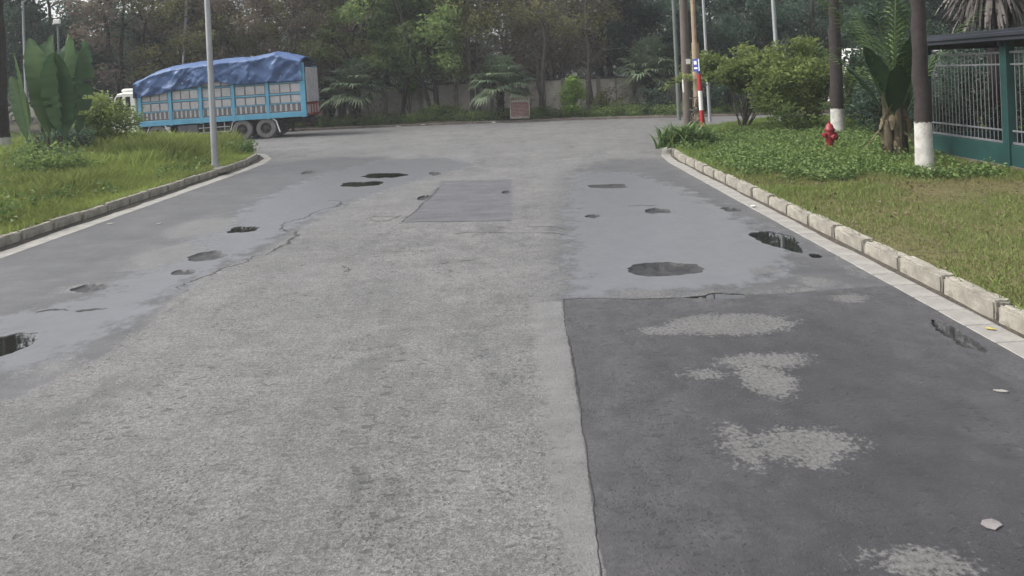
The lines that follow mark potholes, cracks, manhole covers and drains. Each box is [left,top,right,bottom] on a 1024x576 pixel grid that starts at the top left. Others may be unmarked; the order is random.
pothole [742,230,809,254]
pothole [920,317,1001,356]
pothole [163,268,204,277]
pothole [336,180,388,188]
pothole [62,282,118,295]
crack [176,200,344,290]
pothole [221,225,265,234]
pothole [640,207,676,215]
pothole [181,249,235,263]
pothole [0,329,49,359]
pothole [620,260,712,279]
